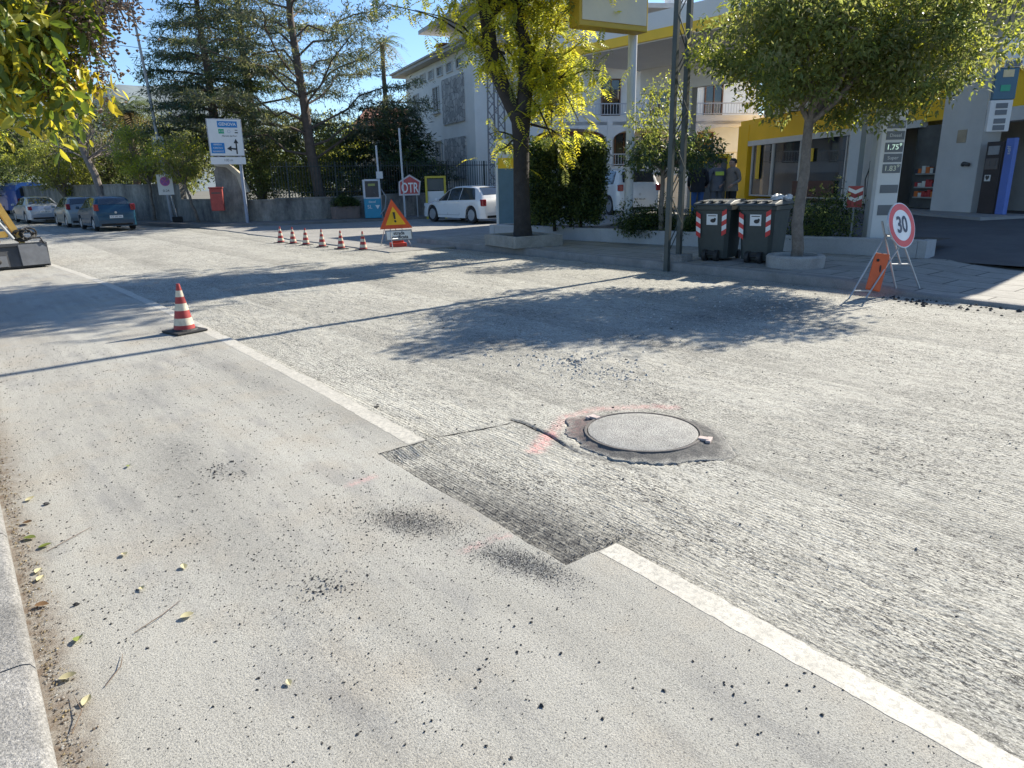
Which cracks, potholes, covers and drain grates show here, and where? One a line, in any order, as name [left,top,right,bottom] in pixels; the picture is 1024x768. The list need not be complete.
manhole cover [564,412,736,466]
